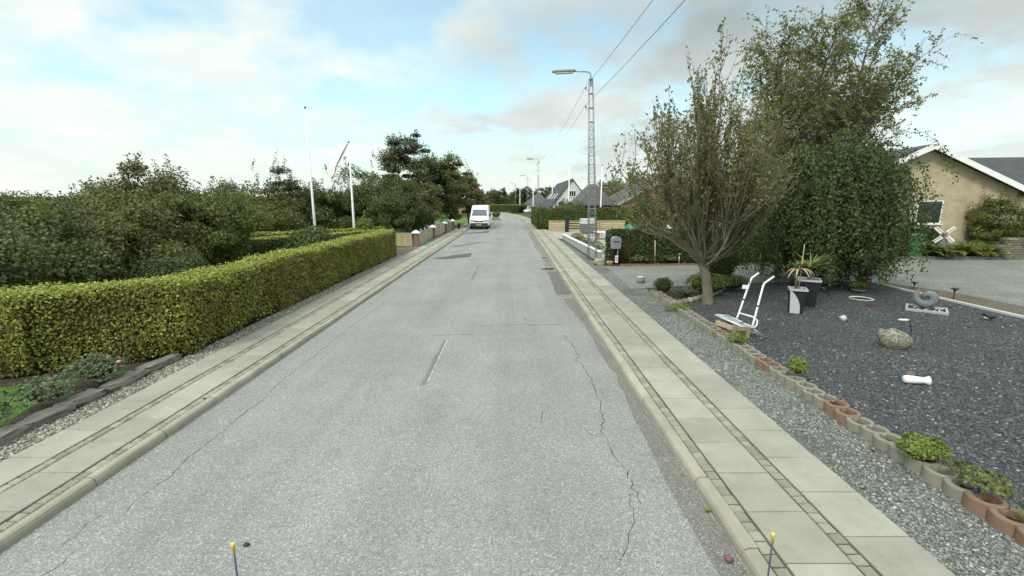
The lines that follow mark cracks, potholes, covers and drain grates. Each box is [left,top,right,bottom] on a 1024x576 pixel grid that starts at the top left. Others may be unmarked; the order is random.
crack [432,278,641,569]
